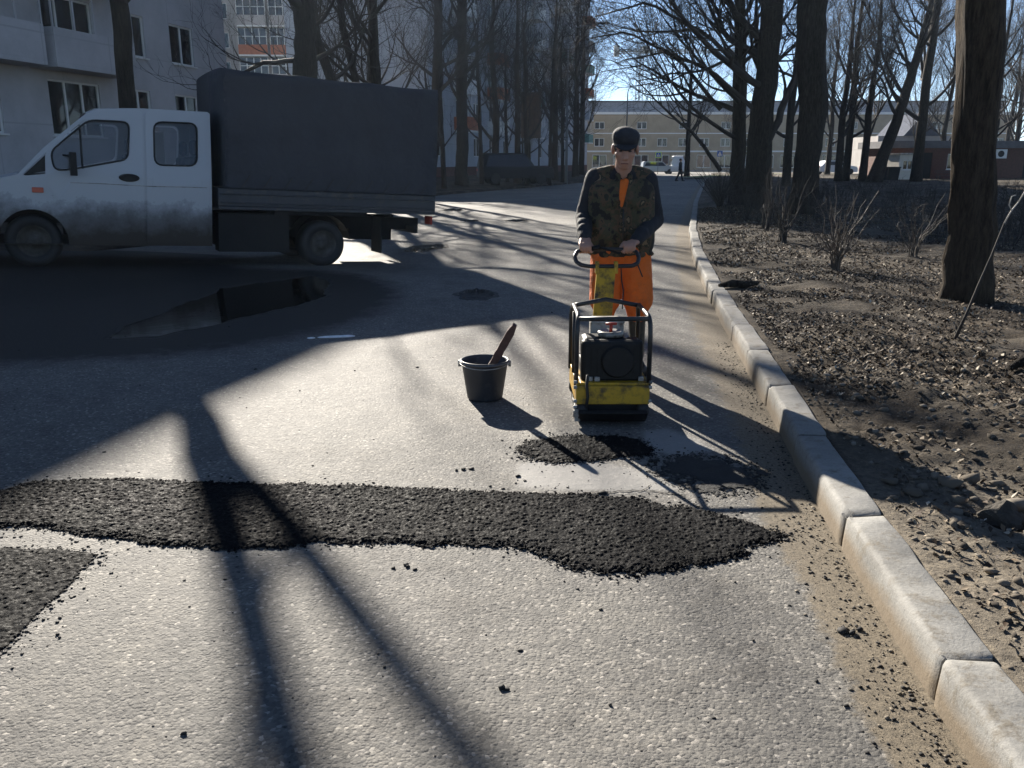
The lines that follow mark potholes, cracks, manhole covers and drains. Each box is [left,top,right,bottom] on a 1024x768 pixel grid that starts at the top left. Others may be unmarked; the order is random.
pothole [104,275,334,340]
